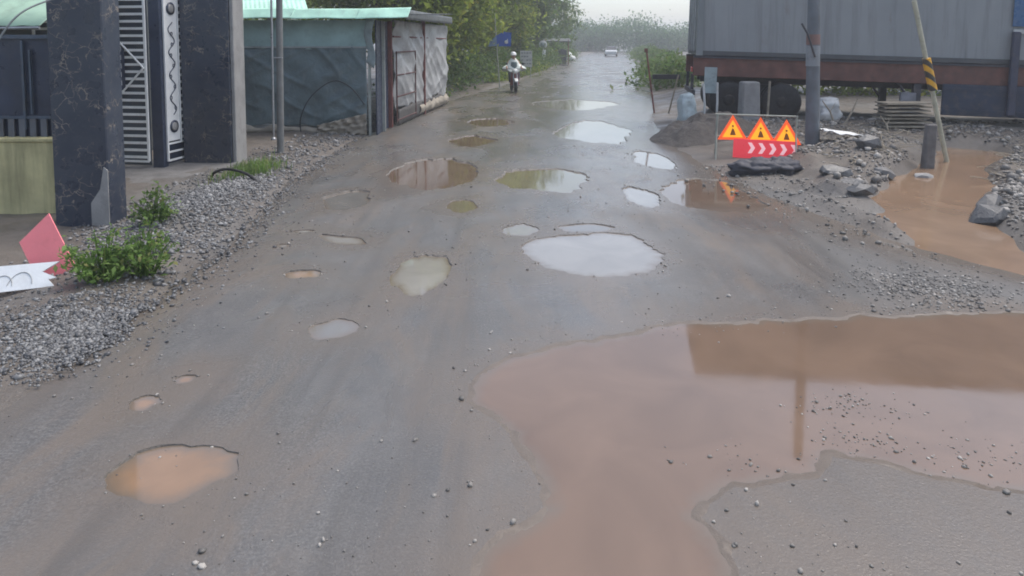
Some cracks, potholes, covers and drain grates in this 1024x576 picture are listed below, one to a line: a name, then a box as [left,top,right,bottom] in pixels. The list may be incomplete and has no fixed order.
pothole [502,223,539,236]
pothole [104,444,239,504]
pothole [318,234,367,245]
pothole [557,223,616,232]
pothole [520,232,665,277]
pothole [389,254,453,296]
pothole [448,135,498,147]
pothole [659,178,771,213]
pothole [622,186,661,208]
pothole [175,374,197,384]
pothole [386,158,479,190]
pothole [633,151,678,170]
